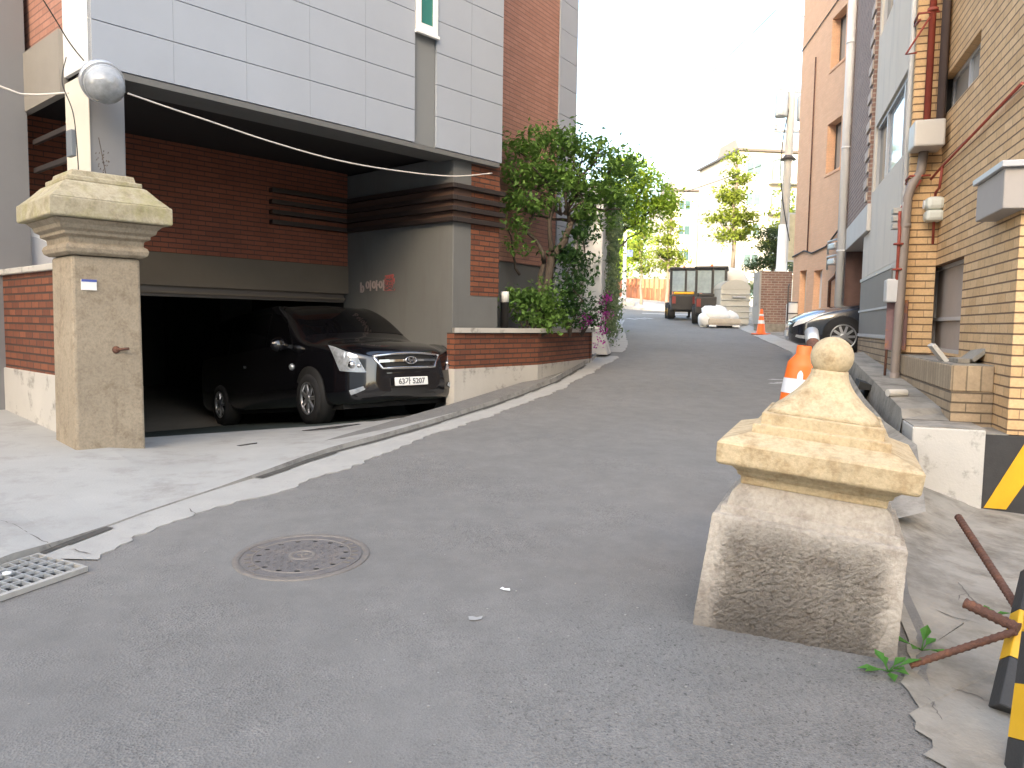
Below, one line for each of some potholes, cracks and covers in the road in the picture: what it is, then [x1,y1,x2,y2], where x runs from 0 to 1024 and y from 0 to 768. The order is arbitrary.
drain grate [0,553,88,602]
manhole cover [232,534,370,581]
